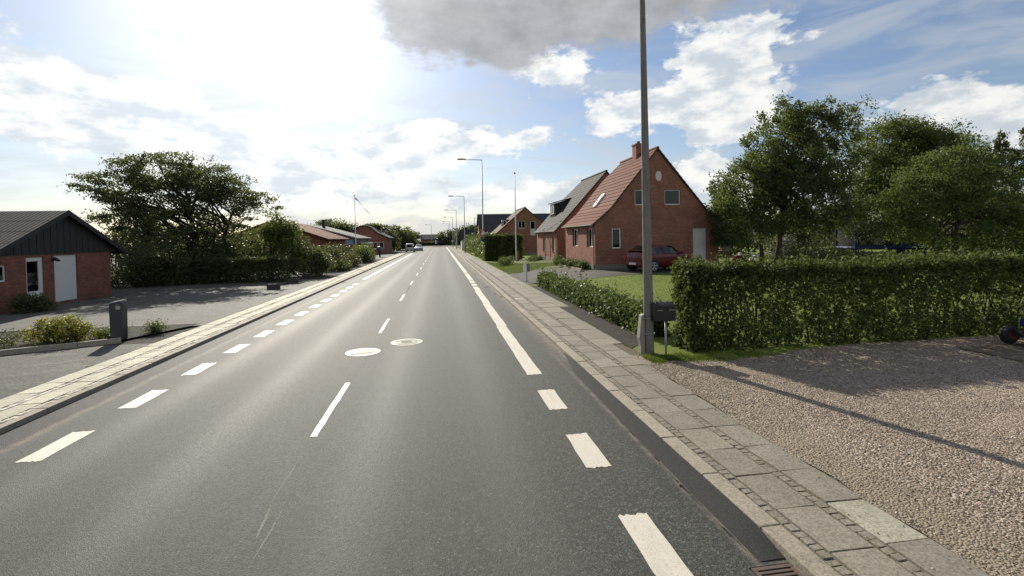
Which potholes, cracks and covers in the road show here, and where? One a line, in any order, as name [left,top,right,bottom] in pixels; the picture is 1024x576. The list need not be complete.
drain grate [751,563,804,576]
manhole cover [345,348,381,357]
crack [253,451,305,559]
